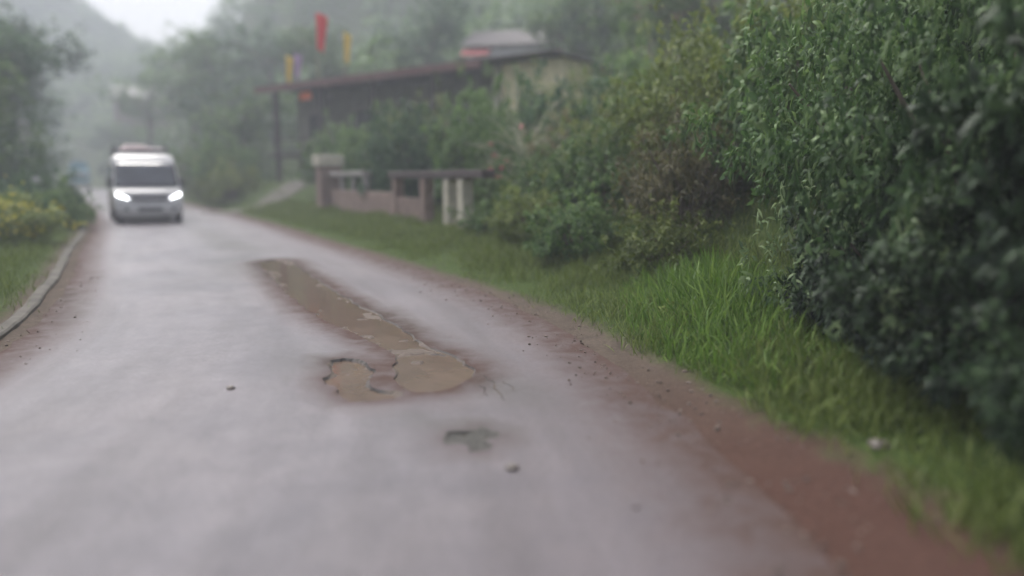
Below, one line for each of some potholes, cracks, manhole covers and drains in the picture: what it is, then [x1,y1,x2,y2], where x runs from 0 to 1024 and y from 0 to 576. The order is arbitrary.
pothole [443,427,499,452]
crack [478,375,516,401]
pothole [323,358,403,401]
pothole [258,259,476,392]
